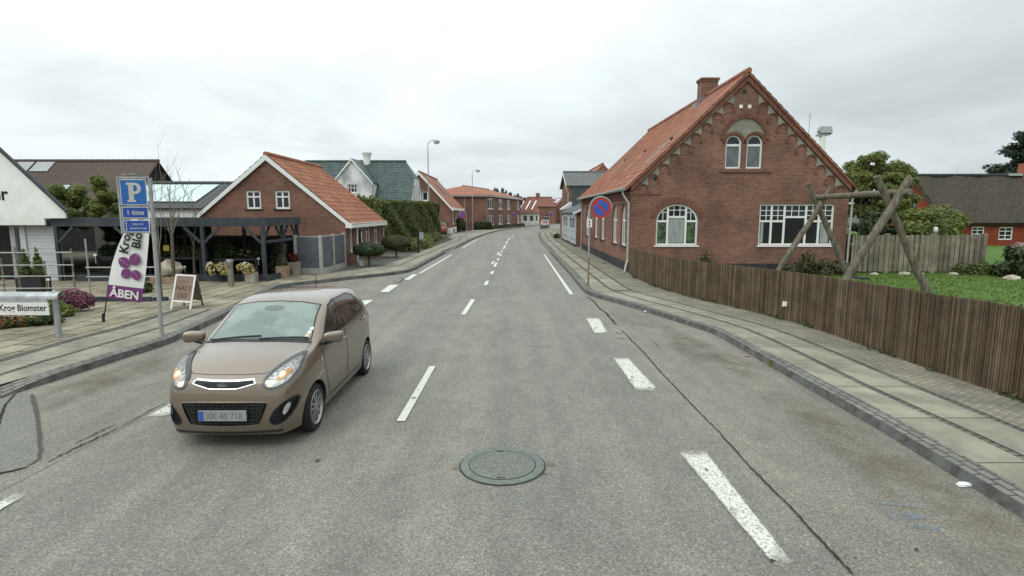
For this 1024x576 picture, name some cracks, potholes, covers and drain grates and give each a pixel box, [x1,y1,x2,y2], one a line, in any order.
crack [48,403,164,462]
manhole cover [459,447,546,486]
